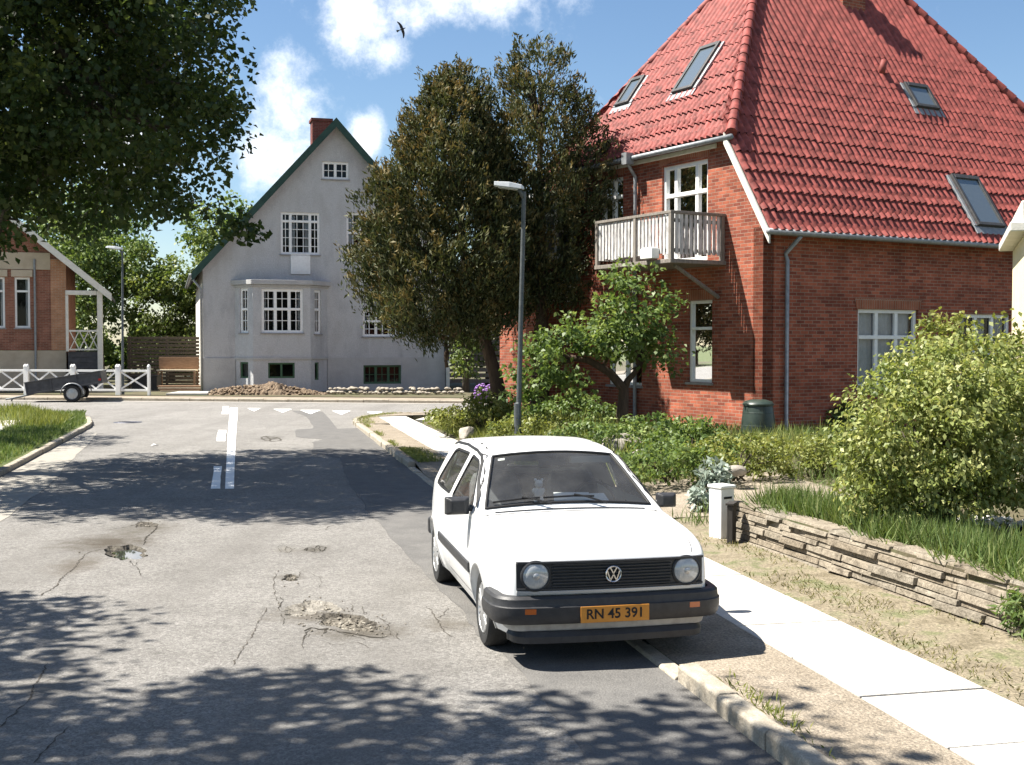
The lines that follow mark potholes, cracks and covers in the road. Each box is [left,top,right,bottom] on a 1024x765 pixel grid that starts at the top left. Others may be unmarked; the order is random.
crack [34,728,67,762]
pothole [290,606,406,637]
pothole [247,596,348,620]
crack [232,574,285,666]
crack [41,549,101,595]
pothole [78,544,148,560]
pothole [130,520,178,529]
crack [0,663,50,727]
